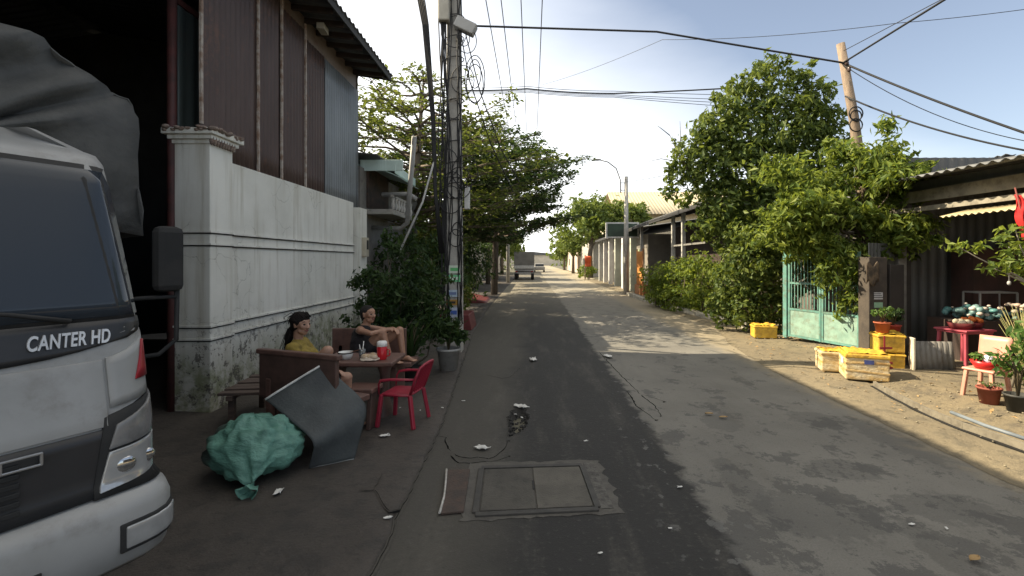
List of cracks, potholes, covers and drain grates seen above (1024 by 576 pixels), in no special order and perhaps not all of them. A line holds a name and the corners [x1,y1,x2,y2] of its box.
crack [598,352,665,421]
manhole cover [459,460,625,522]
crack [436,435,511,465]
crack [358,473,400,513]
pothole [505,407,531,441]
